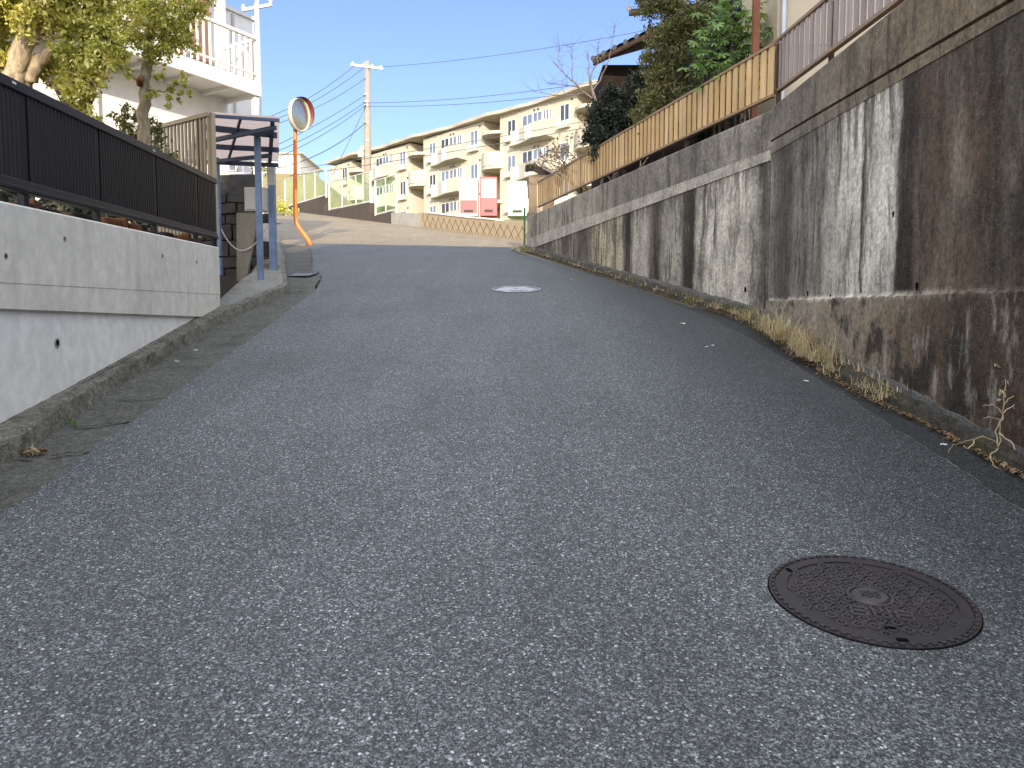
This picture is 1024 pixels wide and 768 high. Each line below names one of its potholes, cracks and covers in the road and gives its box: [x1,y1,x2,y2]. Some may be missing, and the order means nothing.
manhole cover [767,555,984,650]
